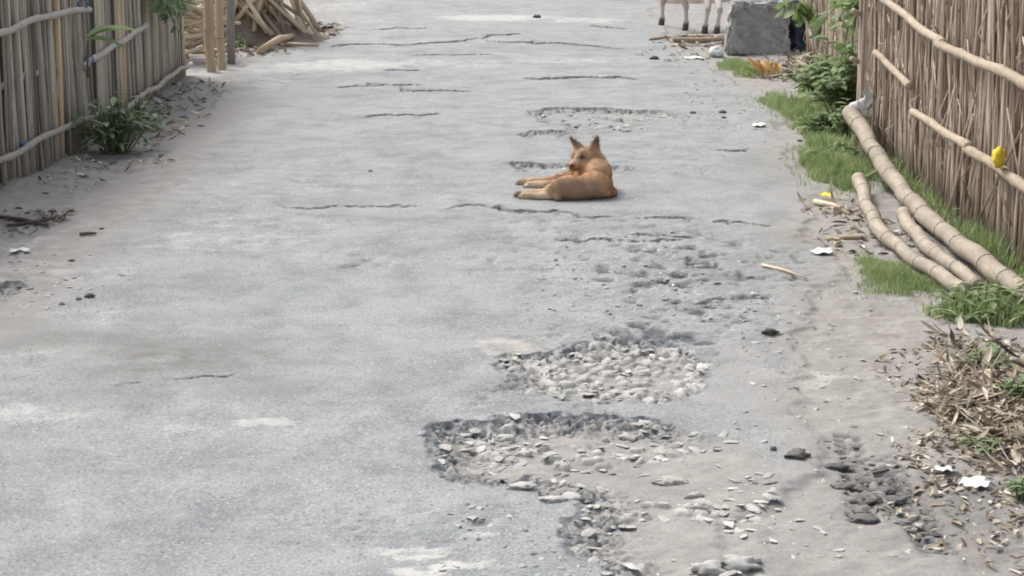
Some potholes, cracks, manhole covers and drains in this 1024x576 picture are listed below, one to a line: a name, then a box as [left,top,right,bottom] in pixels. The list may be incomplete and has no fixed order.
crack [331,25,629,92]
pothole [424,412,791,576]
crack [165,372,241,380]
crack [445,203,694,244]
pothole [526,107,697,141]
pothole [491,336,726,407]
